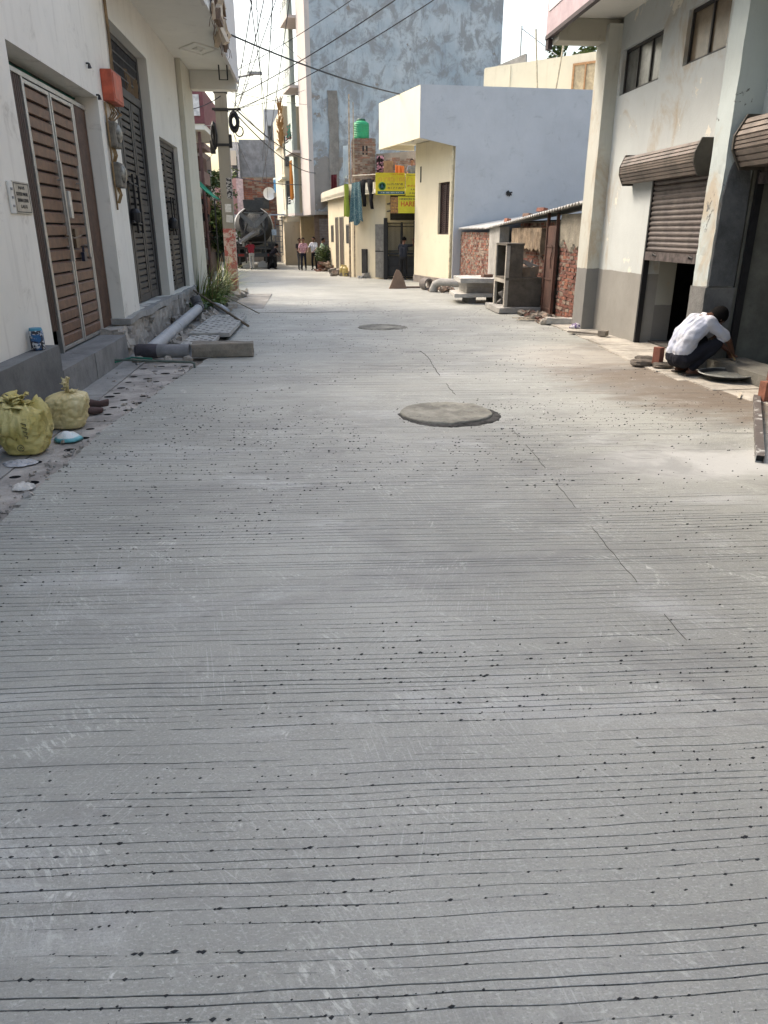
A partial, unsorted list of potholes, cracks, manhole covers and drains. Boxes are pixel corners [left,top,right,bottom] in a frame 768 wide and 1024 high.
manhole cover [398,402,501,428]
crack [511,428,687,641]
